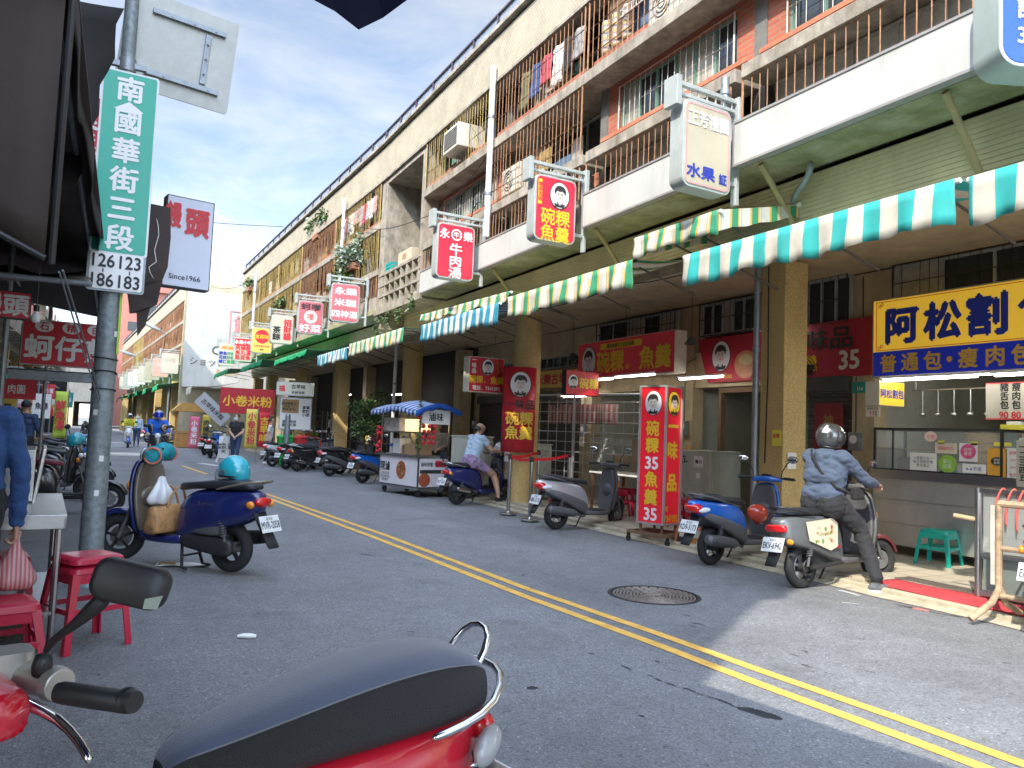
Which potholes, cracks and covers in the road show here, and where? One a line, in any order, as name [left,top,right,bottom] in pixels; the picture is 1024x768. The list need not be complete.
manhole cover [607,585,701,605]
